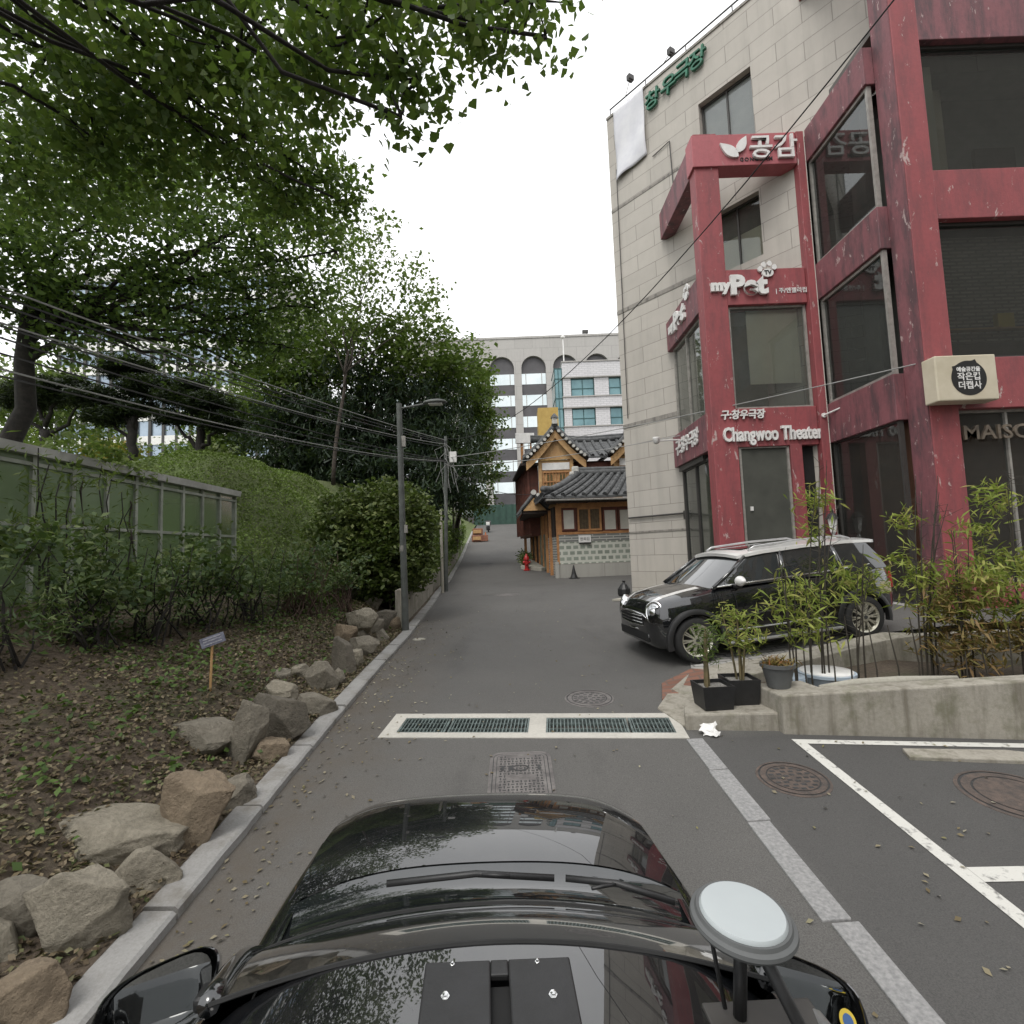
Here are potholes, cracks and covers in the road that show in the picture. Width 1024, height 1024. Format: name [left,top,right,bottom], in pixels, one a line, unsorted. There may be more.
manhole cover [755,762,833,798]
manhole cover [487,751,556,793]
manhole cover [565,690,614,707]
manhole cover [953,770,1024,819]
